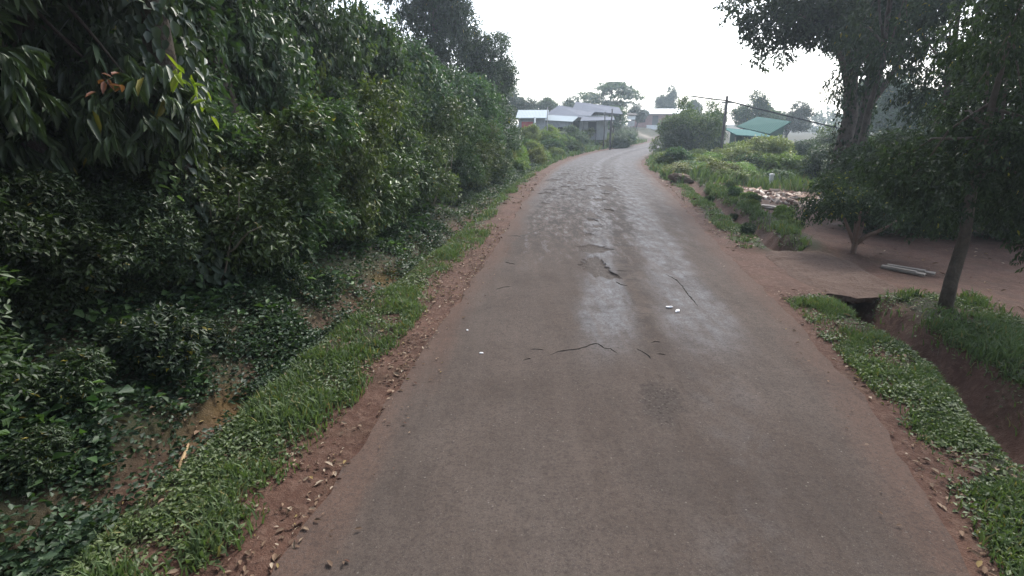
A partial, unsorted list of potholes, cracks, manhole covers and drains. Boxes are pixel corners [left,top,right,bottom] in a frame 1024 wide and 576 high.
pothole [577,255,623,280]
pothole [576,244,615,254]
crack [525,343,615,360]
